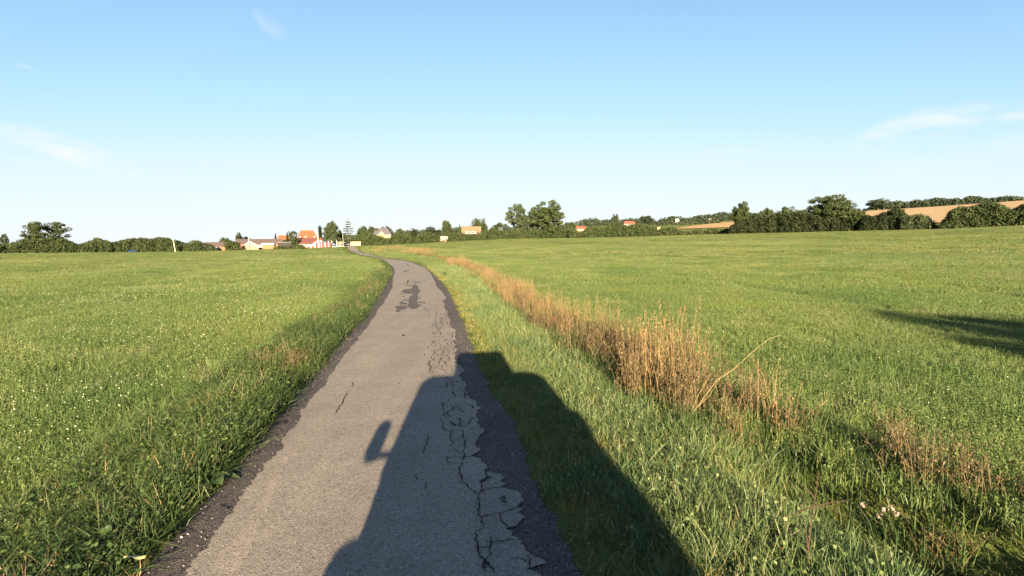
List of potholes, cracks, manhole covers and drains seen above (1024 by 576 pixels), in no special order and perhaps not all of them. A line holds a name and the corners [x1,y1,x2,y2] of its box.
crack [422,314,532,572]
